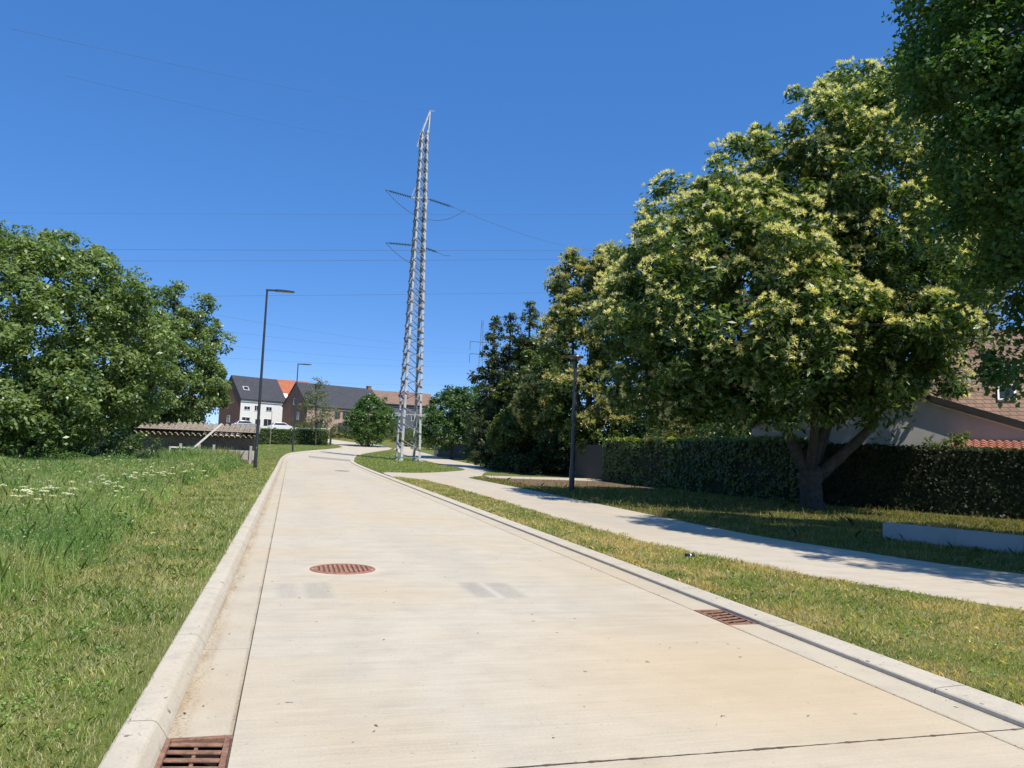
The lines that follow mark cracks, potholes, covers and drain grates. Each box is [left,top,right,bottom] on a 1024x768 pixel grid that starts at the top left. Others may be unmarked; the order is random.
manhole cover [310,563,375,575]
drain grate [694,609,758,625]
drain grate [154,735,231,768]
